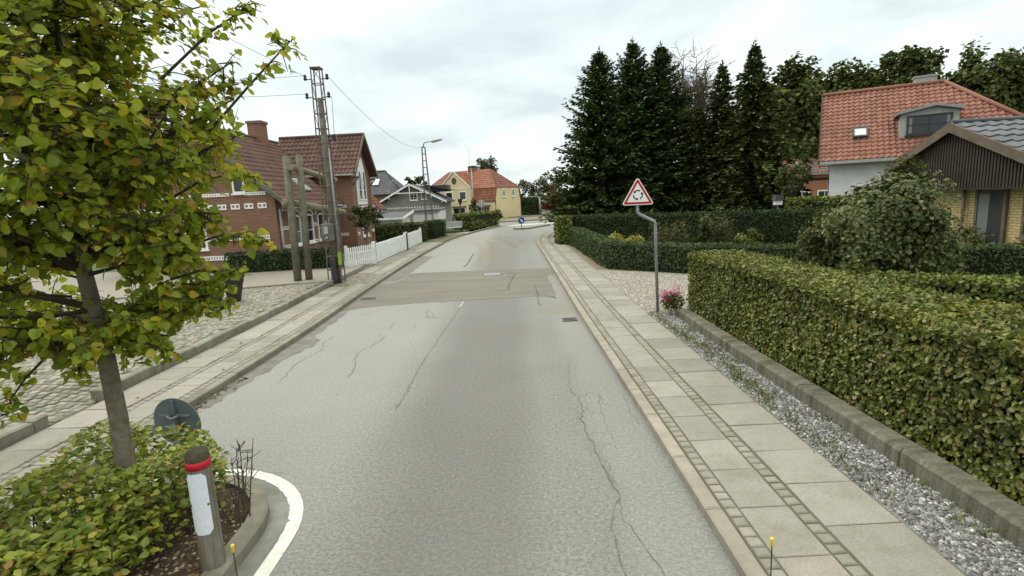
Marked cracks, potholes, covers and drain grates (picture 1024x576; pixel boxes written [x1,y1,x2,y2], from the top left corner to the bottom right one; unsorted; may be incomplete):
crack [568,358,666,576]
